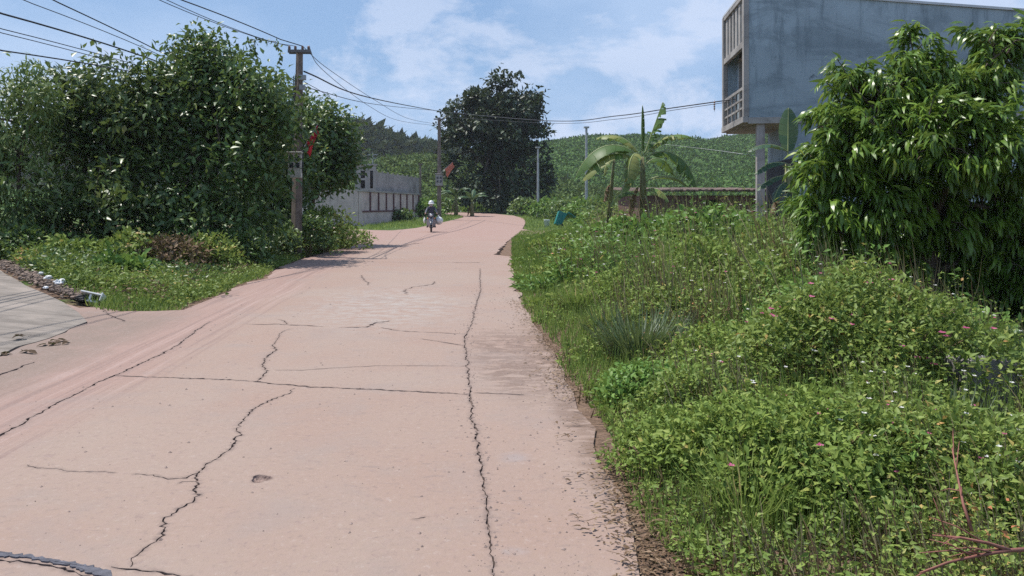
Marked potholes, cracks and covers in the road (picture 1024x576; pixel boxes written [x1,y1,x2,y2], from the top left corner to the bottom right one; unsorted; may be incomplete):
pothole [252,475,272,483]
crack [257,320,321,380]
crack [113,389,293,576]
